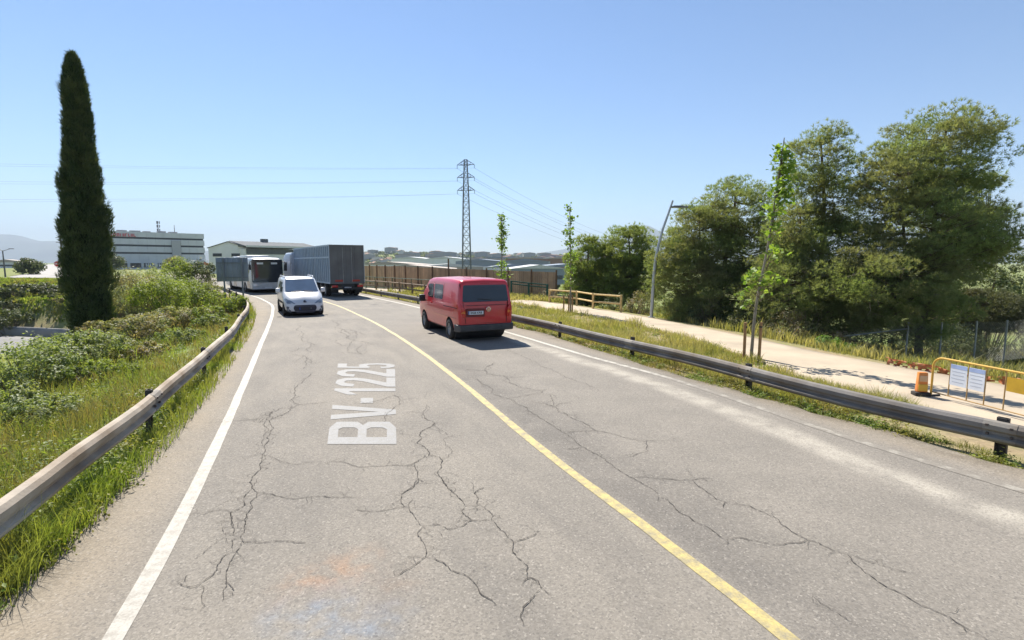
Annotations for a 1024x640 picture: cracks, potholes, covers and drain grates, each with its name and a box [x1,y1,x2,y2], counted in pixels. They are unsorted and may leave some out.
crack [328,395,548,625]
crack [172,373,360,613]
crack [472,351,985,638]
